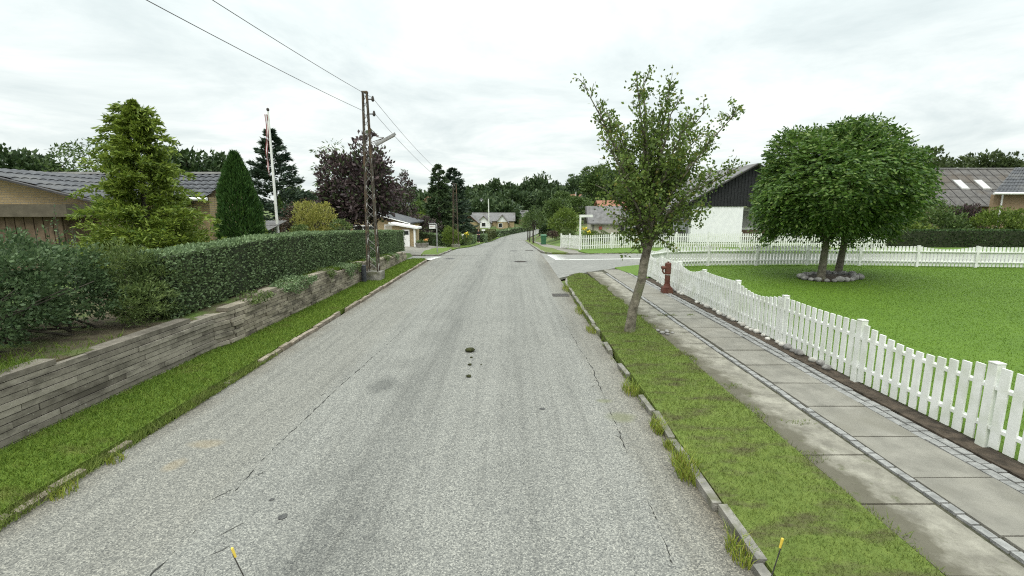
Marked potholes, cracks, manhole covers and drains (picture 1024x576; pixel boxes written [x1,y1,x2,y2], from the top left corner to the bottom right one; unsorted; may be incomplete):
crack [541,281,673,564]
crack [150,312,422,576]
